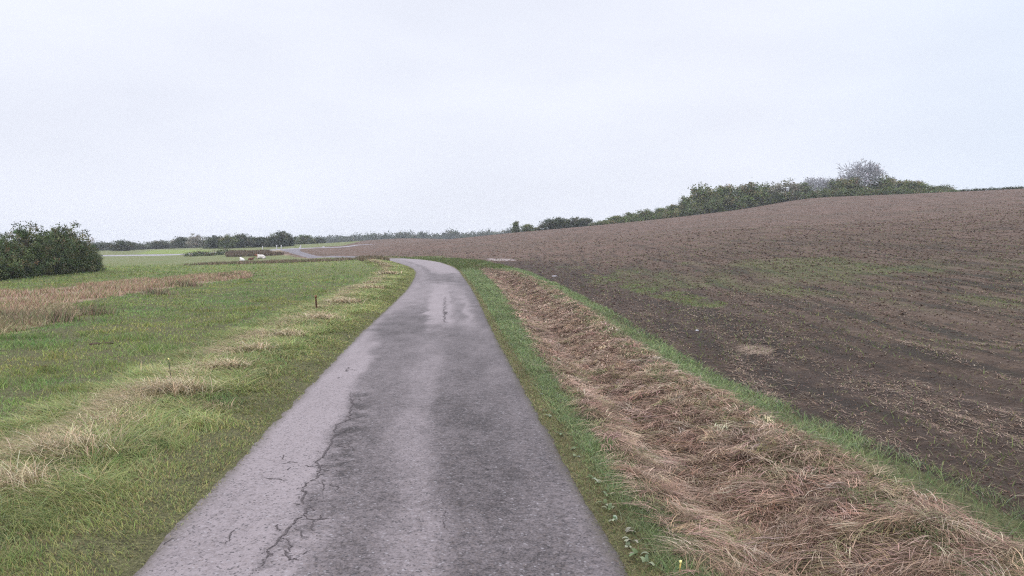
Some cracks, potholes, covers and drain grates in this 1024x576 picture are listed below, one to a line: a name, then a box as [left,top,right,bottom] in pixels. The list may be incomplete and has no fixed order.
crack [250,392,365,574]
